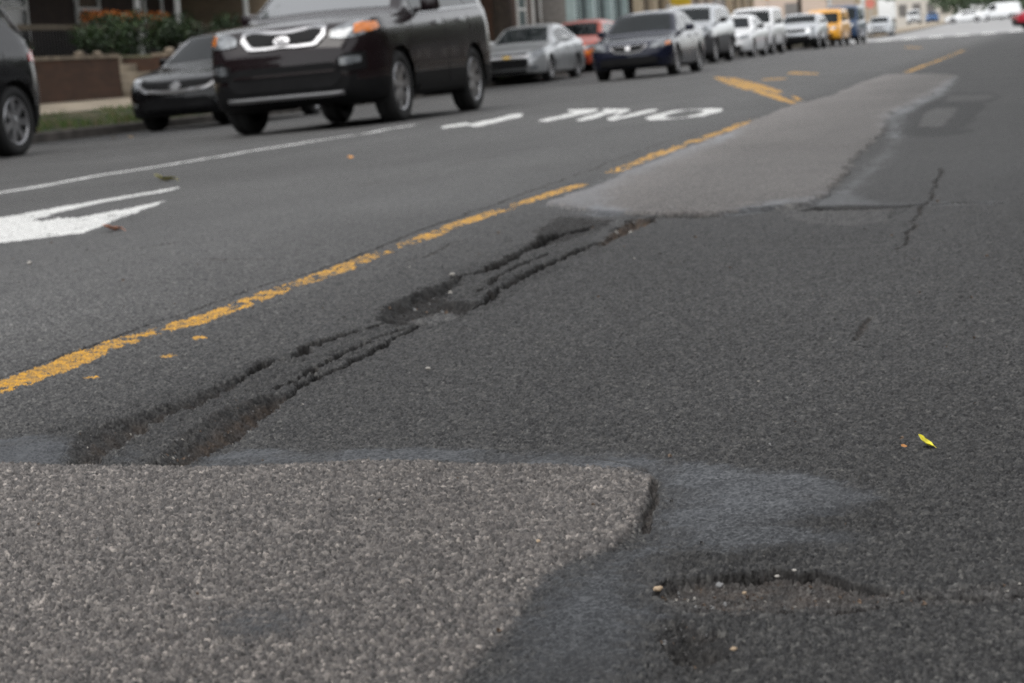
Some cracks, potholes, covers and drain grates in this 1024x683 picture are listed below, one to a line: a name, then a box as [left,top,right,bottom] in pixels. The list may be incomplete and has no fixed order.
crack [452,230,595,310]
pothole [659,577,1024,617]
crack [239,323,418,399]
crack [799,169,1001,250]
